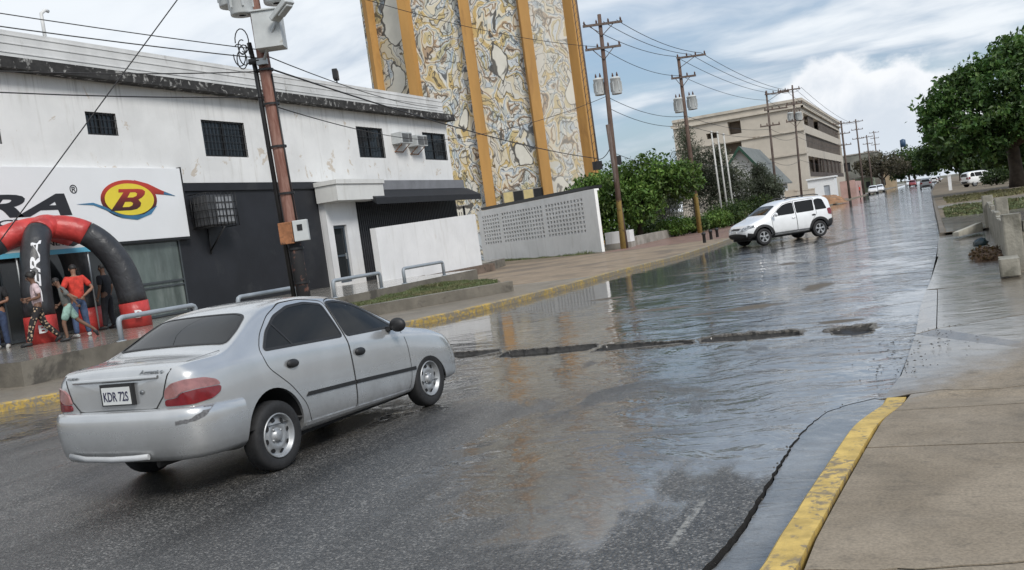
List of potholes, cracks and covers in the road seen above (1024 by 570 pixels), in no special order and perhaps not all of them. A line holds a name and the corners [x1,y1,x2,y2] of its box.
pothole [696,328,807,343]
pothole [590,339,696,352]
pothole [453,348,503,359]
pothole [496,343,601,358]
pothole [822,322,881,336]
